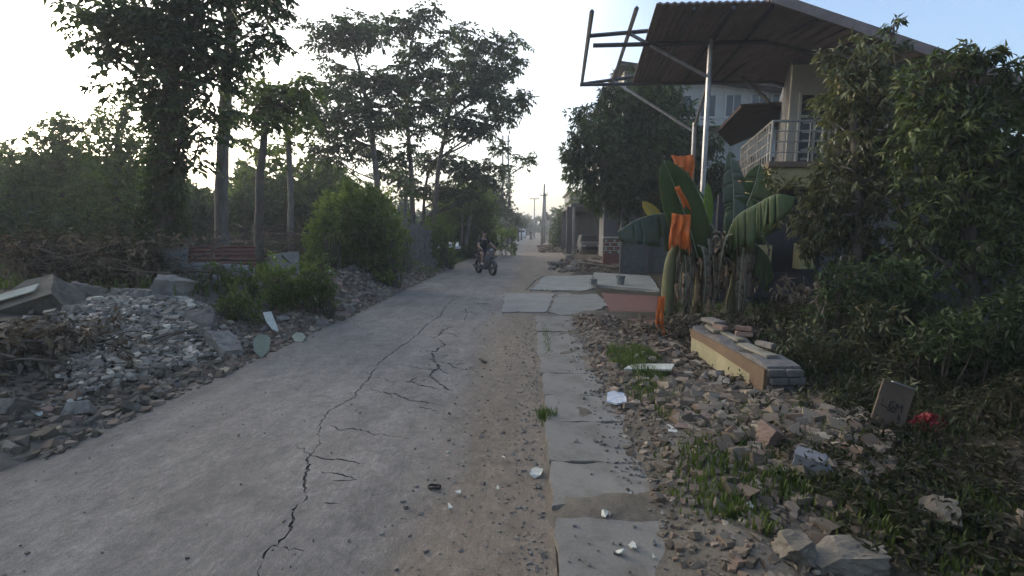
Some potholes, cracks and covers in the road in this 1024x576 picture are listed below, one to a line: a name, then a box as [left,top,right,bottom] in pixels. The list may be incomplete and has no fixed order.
crack [257,296,468,576]
